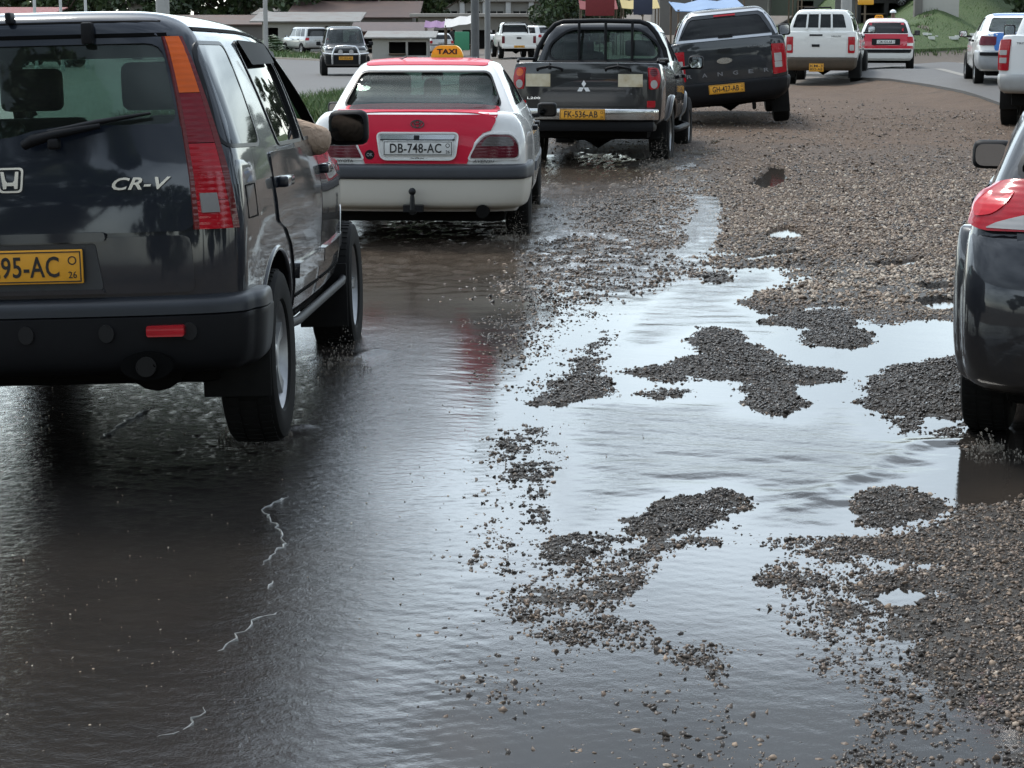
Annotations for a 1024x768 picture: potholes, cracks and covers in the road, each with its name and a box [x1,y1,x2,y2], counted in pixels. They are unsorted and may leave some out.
pothole [534,393,971,534]
crack [99,407,151,438]
pothole [915,294,954,309]
pothole [658,195,725,257]
pothole [913,281,954,290]
pothole [741,165,794,188]
pothole [632,547,763,641]
pothole [875,585,927,606]
crack [261,496,289,588]
pothole [864,256,927,267]
pothole [615,269,801,350]
pothole [767,225,810,238]
